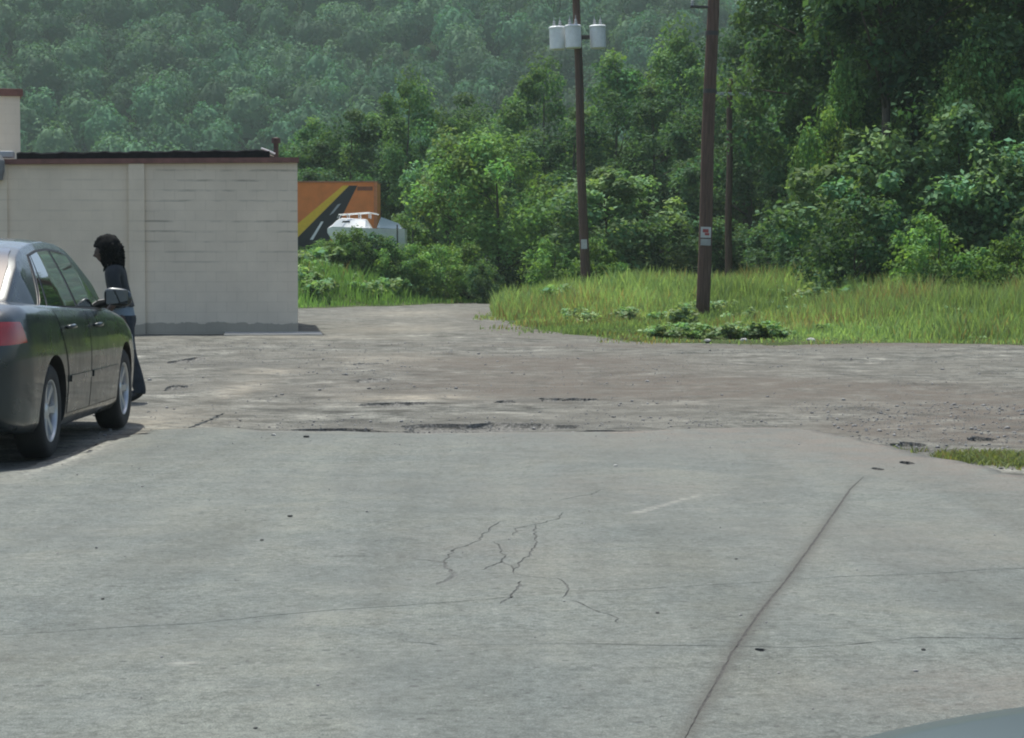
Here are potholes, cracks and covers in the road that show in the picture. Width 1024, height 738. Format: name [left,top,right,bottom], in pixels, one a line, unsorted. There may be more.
crack [3,490,1024,635]
crack [188,413,224,428]
pothole [401,422,579,433]
